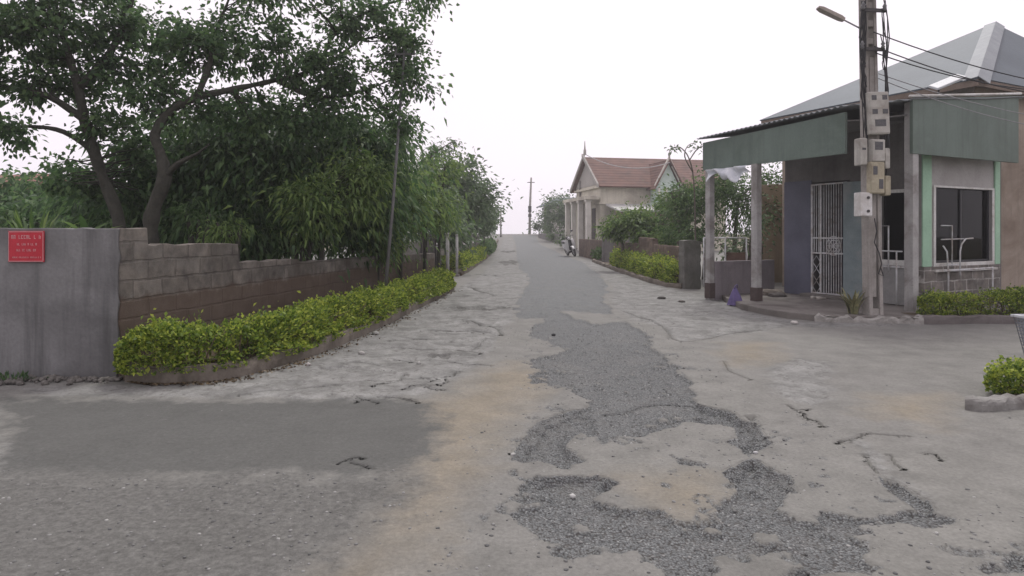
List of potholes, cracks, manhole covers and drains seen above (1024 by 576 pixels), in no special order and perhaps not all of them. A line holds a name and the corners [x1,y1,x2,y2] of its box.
crack [333,456,374,470]
pothole [693,405,775,454]
crack [783,404,947,477]
crack [240,320,505,404]
pothole [874,473,937,520]
crack [720,361,754,380]
crack [621,311,762,343]
pothole [530,475,619,509]
pothole [721,457,794,502]
